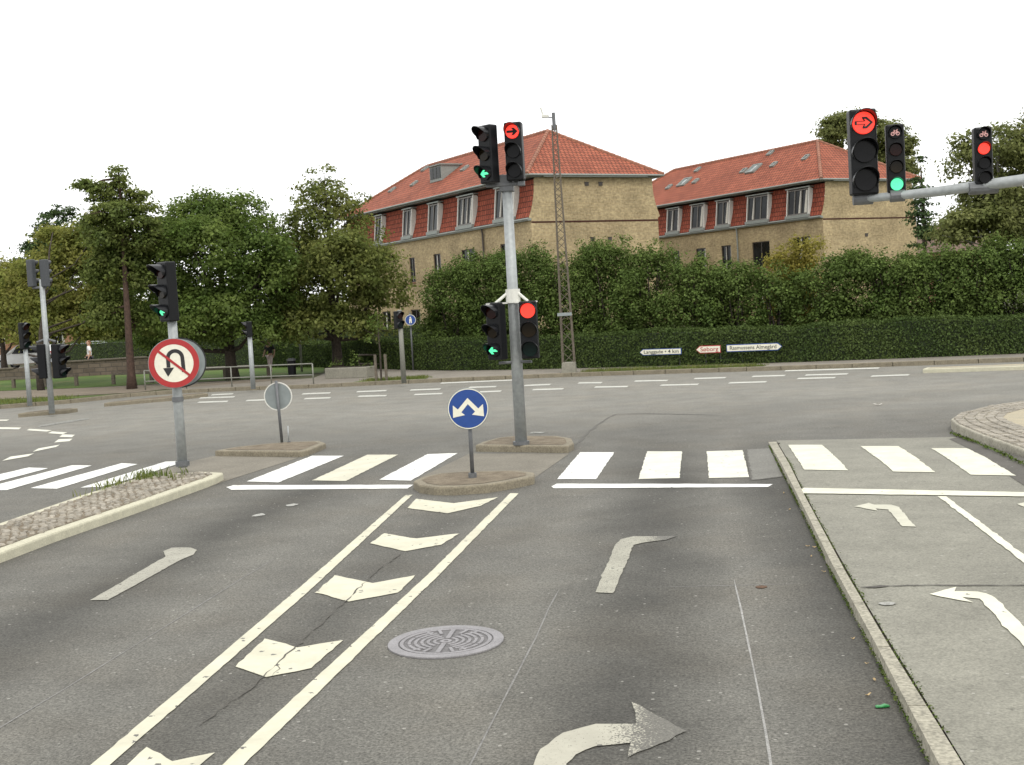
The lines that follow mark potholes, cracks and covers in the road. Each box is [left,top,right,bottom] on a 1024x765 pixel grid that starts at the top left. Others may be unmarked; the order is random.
crack [199,553,401,725]
manhole cover [388,625,504,659]
